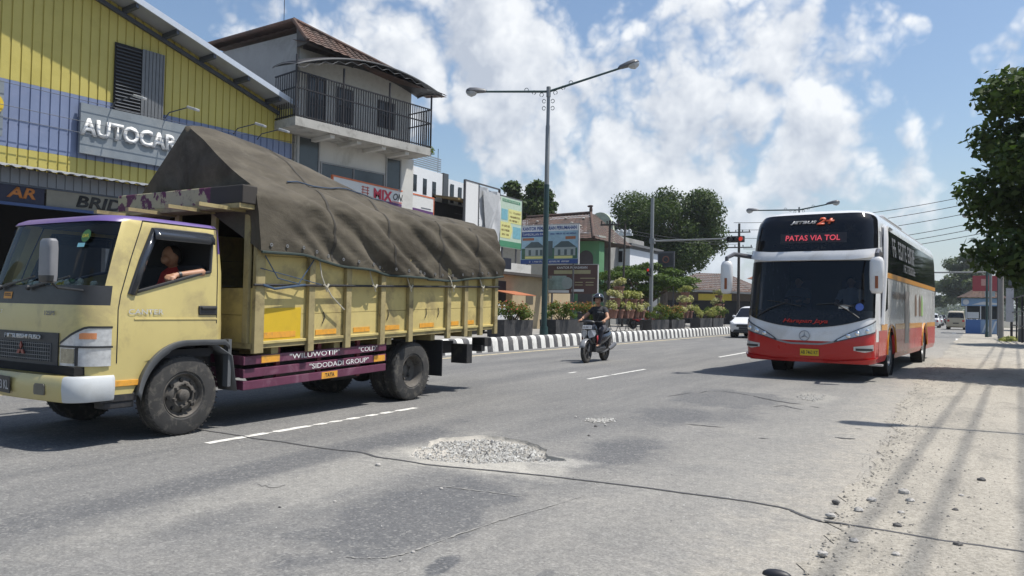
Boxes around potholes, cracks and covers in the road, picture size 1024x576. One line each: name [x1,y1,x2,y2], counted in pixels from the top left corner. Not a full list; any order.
crack [196,428,1024,552]
pothole [410,435,566,464]
